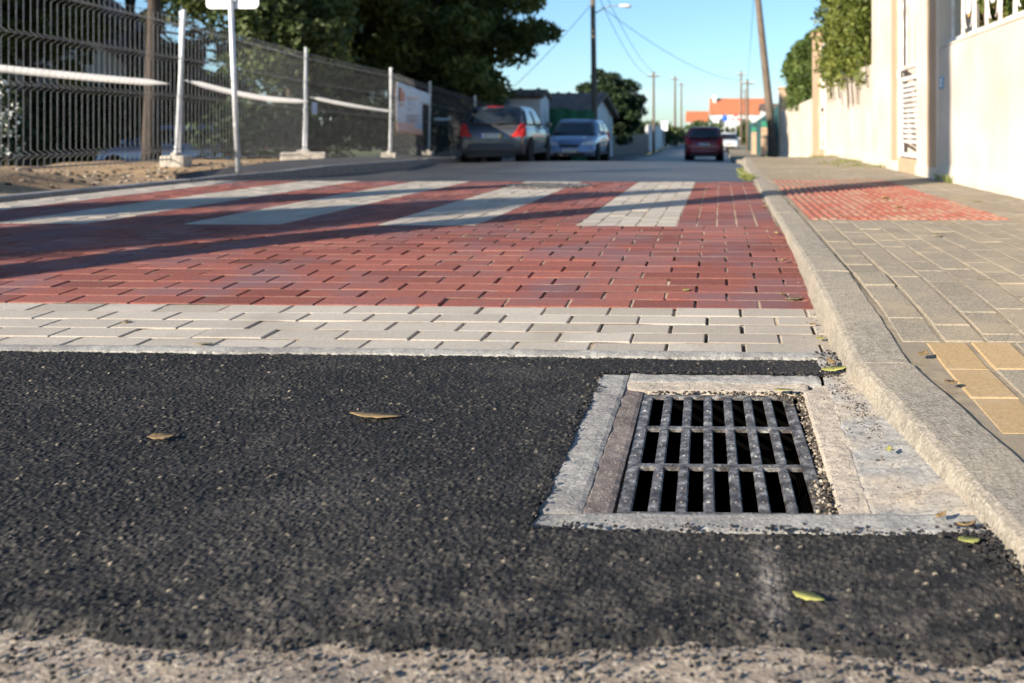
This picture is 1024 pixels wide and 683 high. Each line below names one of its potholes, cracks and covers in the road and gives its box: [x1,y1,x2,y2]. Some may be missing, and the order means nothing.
drain grate [532,373,987,536]
